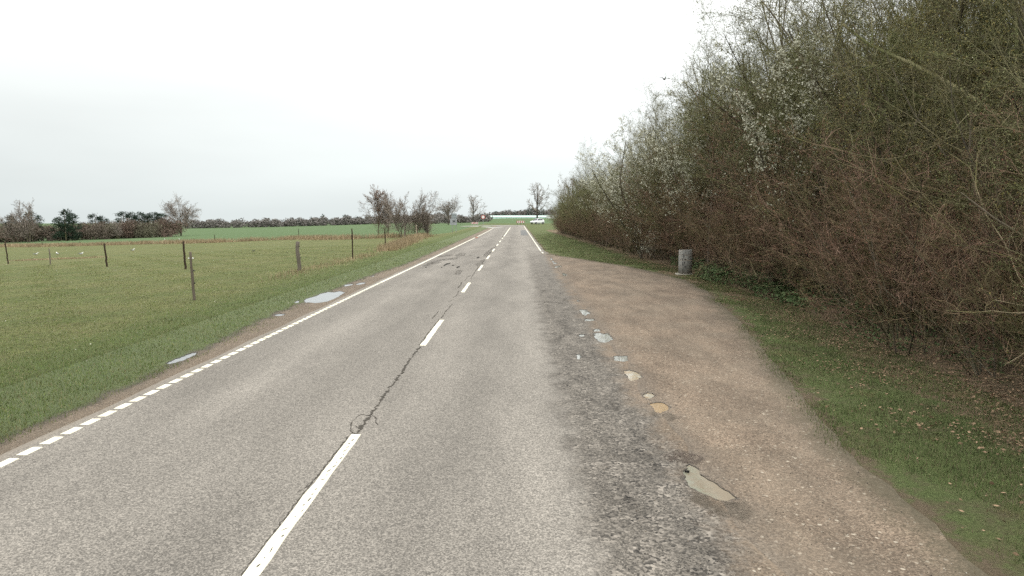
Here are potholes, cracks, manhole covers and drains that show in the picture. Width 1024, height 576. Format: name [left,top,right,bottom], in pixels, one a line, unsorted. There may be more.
crack [241,275,471,576]
pothole [593,332,613,342]
pothole [650,402,669,413]
pothole [683,464,736,501]
pothole [624,370,642,381]
